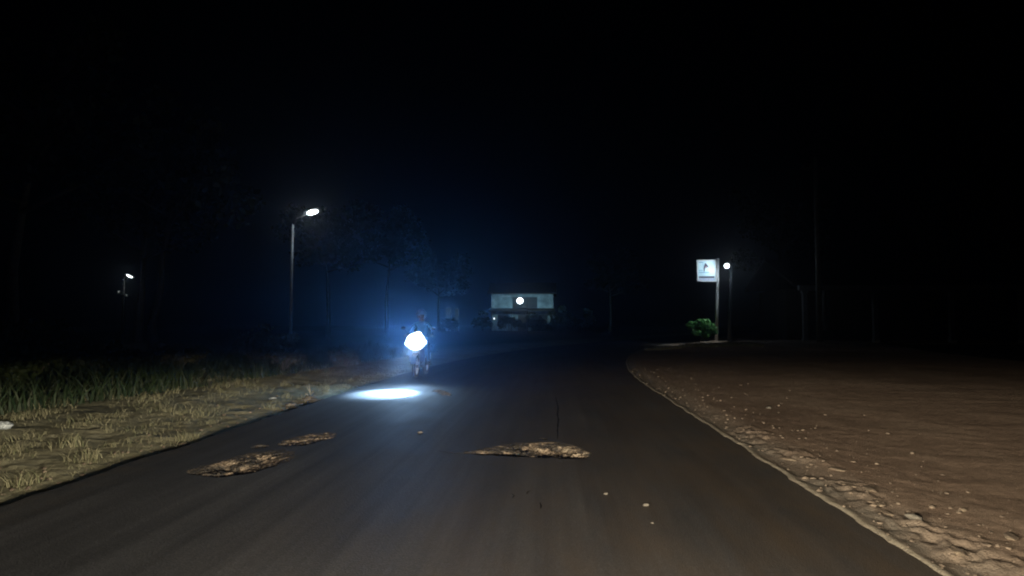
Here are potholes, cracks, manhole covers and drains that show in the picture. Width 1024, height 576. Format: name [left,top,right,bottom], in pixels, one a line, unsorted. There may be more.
pothole [187,450,295,477]
pothole [463,441,593,459]
pothole [277,432,339,446]
